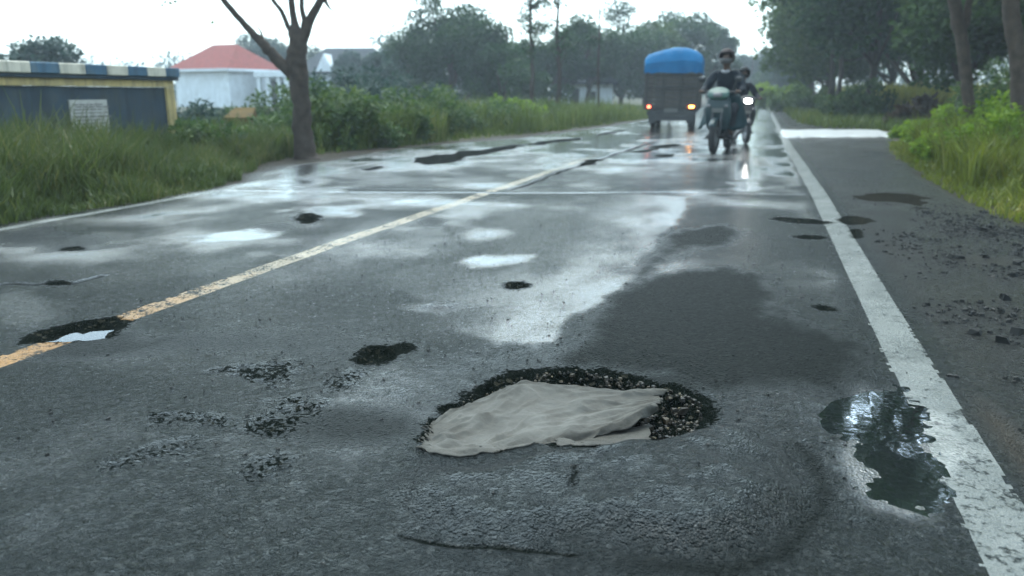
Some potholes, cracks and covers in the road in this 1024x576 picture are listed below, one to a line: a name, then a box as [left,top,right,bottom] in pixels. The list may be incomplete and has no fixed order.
pothole [837,216,872,225]
crack [0,274,110,286]
crack [401,532,586,557]
pothole [21,318,125,344]
pothole [297,214,321,224]
pothole [421,368,712,447]
pothole [853,193,928,209]
pothole [415,154,464,165]
pothole [448,144,524,157]
pothole [356,346,396,364]
